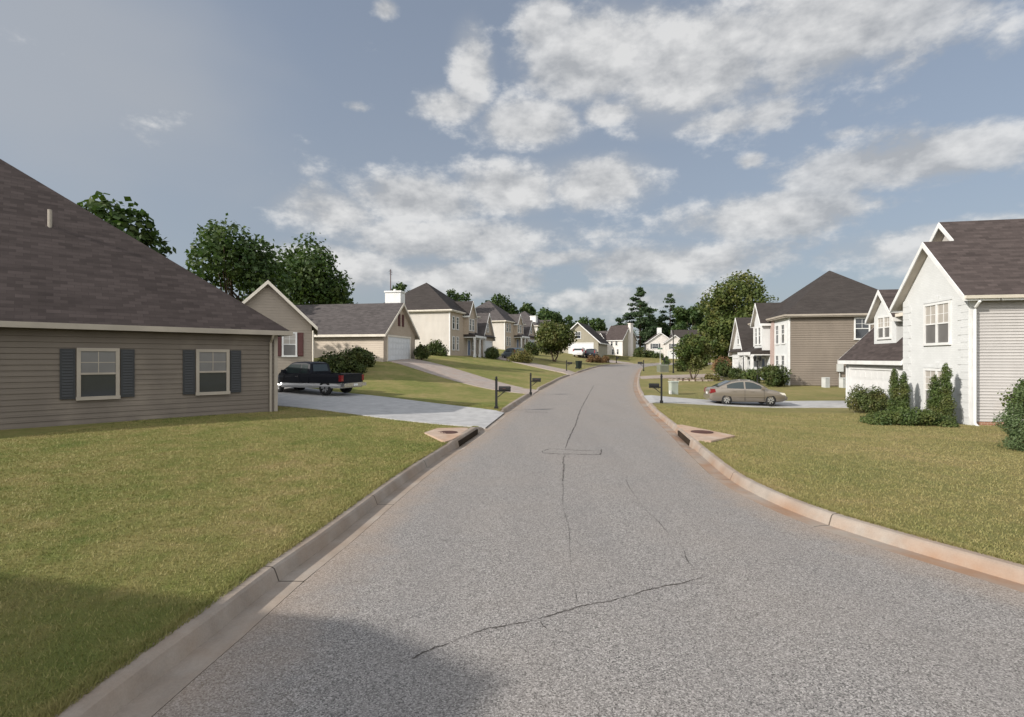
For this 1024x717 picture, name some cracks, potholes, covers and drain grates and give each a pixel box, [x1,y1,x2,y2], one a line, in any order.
crack [411,387,833,659]
drain grate [424,427,478,447]
drain grate [677,425,735,446]
